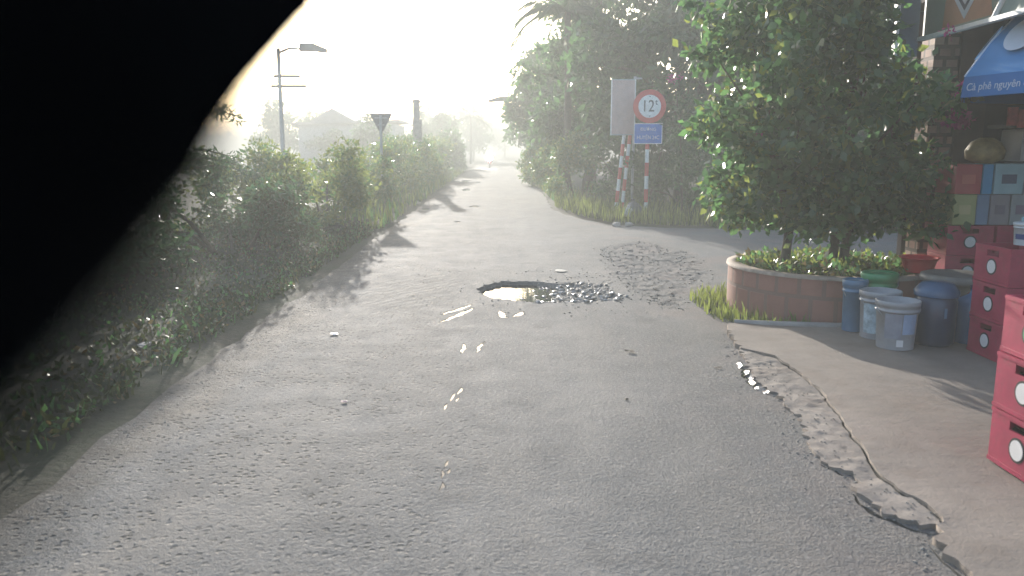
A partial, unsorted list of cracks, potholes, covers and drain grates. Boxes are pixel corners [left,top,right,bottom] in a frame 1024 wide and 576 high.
pothole [476,281,628,303]
